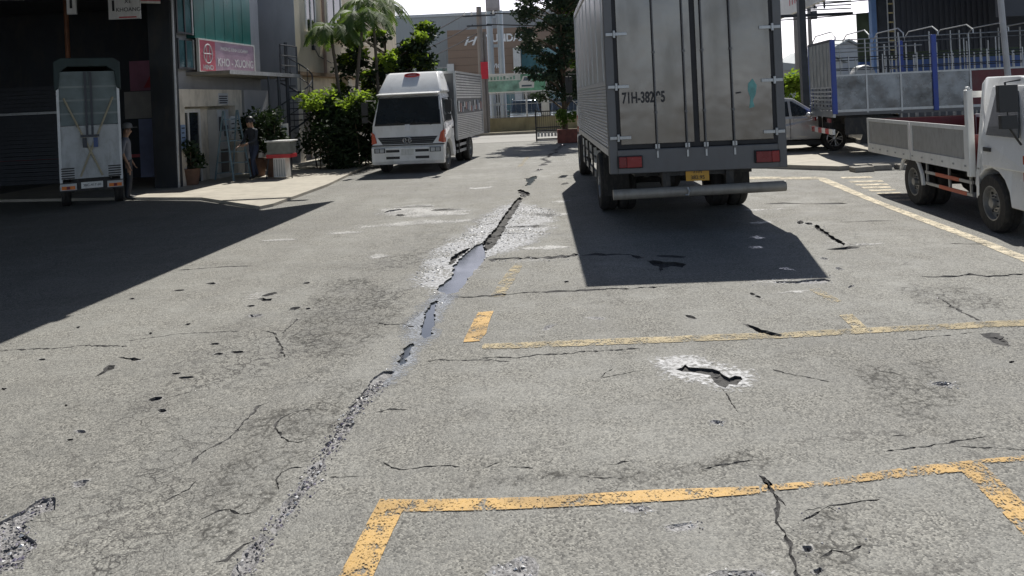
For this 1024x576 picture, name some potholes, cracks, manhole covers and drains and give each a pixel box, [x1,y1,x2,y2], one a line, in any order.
crack [275,467,303,490]
pothole [420,301,439,339]
pothole [676,365,742,388]
crack [705,460,880,576]
pothole [397,343,414,365]
pothole [0,497,56,572]
crack [191,403,309,464]
crack [218,540,255,562]
pothole [436,243,487,294]
pothole [483,197,523,250]
